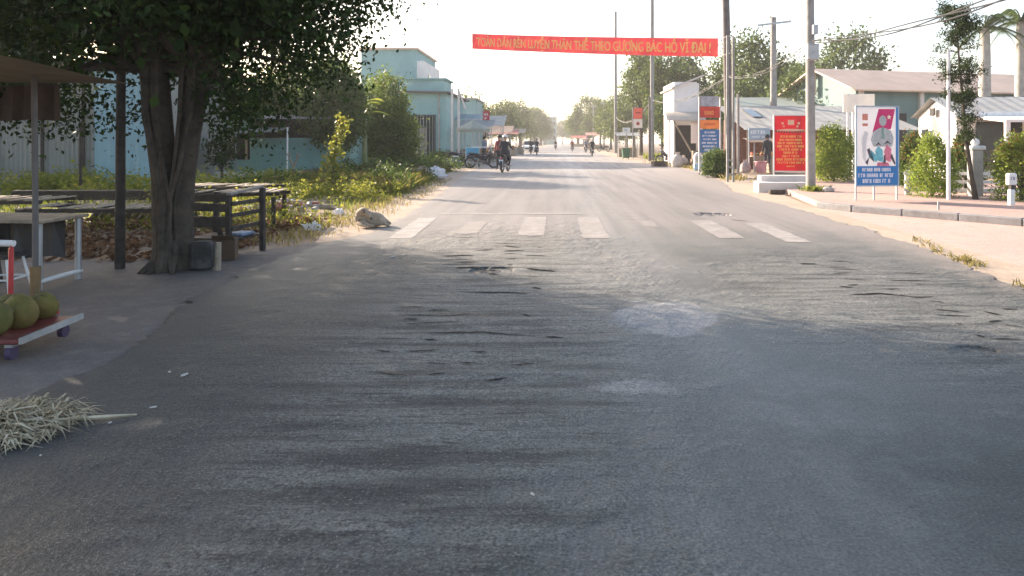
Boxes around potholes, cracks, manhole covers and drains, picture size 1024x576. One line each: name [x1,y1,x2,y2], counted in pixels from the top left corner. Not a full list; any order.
crack [378,237,562,380]
pothole [456,265,528,276]
crack [799,260,1024,340]
